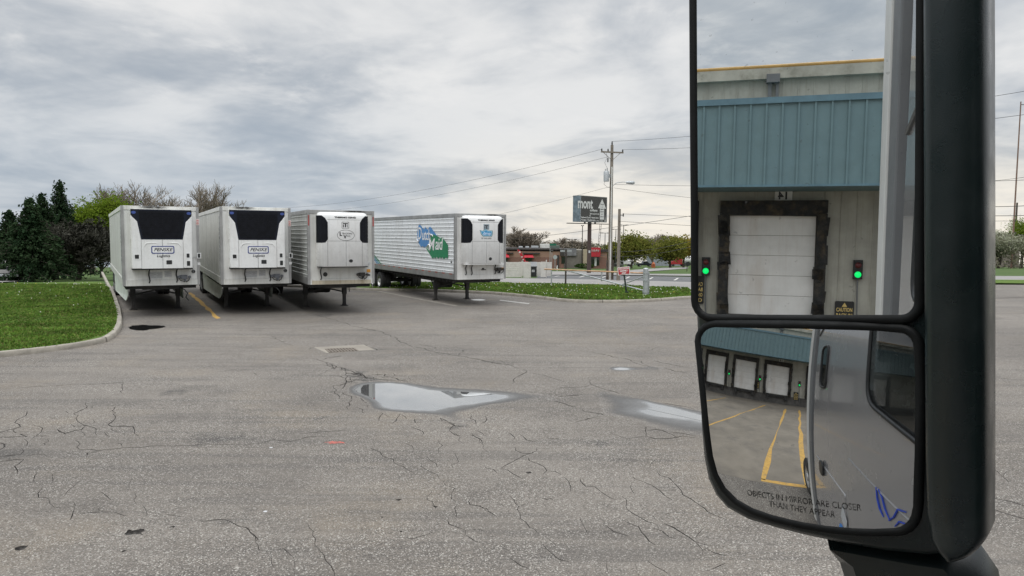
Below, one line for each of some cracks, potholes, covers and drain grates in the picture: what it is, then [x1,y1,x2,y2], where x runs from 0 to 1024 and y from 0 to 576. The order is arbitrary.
drain grate [314,344,374,353]
crack [555,378,692,421]
crack [316,314,570,383]
crack [369,413,725,575]
crack [310,348,410,411]
crack [0,403,342,520]
crack [172,515,295,576]
